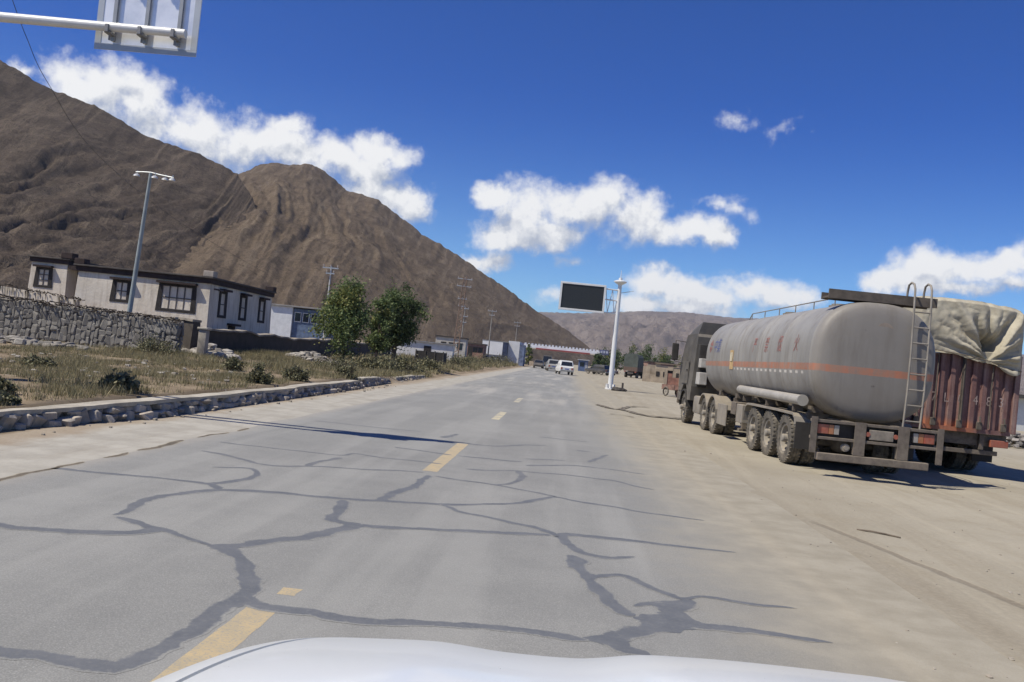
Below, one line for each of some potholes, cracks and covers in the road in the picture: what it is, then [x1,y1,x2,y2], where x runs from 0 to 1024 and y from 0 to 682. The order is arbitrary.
crack [0,428,250,481]
crack [596,404,681,418]
